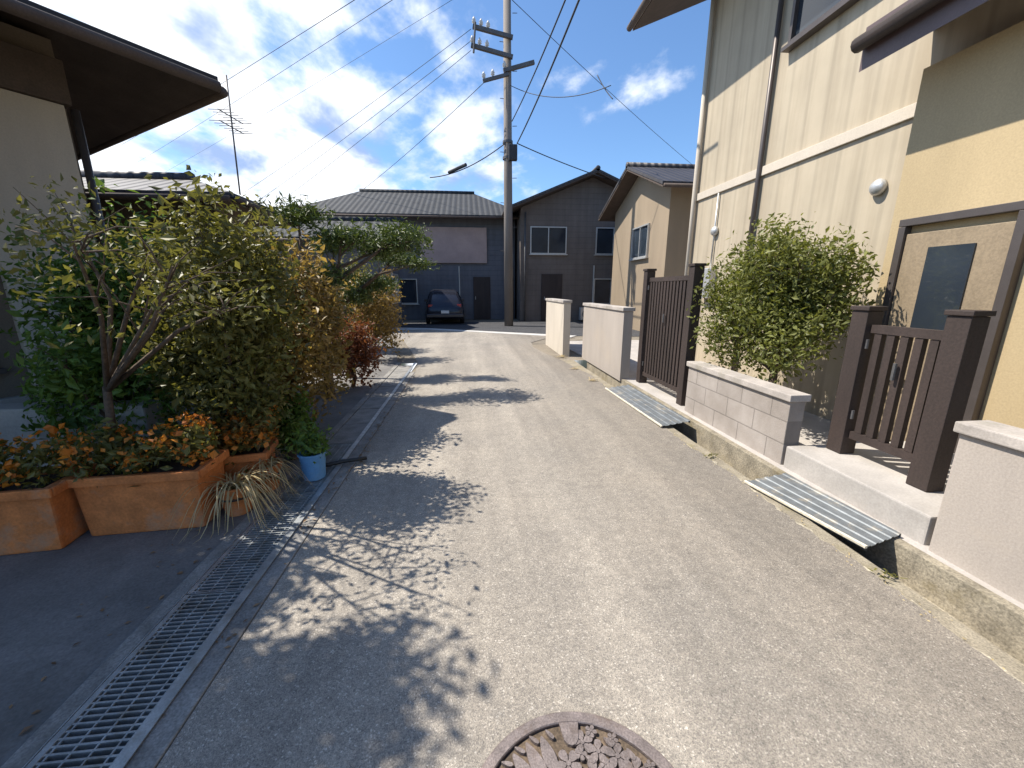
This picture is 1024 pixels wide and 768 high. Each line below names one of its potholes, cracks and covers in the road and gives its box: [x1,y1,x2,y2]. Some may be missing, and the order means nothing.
drain grate [279,443,353,495]
drain grate [187,493,316,595]
drain grate [25,591,242,768]
manhole cover [481,711,674,768]
